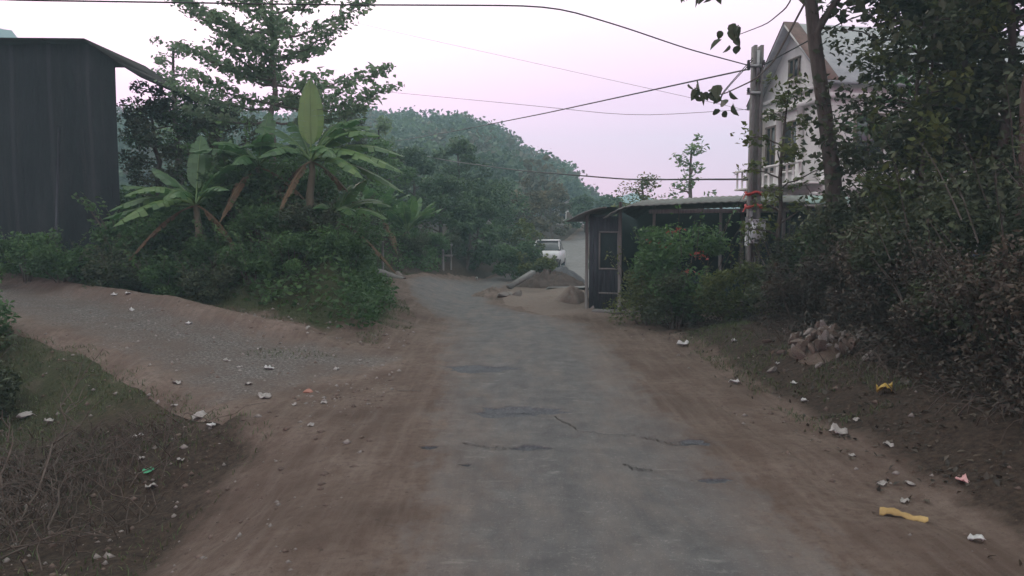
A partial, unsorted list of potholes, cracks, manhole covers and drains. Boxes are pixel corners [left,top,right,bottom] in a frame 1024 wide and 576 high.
pothole [468,405,576,419]
crack [622,463,653,472]
crack [554,416,680,446]
pothole [442,364,522,374]
pothole [691,477,739,486]
crack [463,442,510,451]
